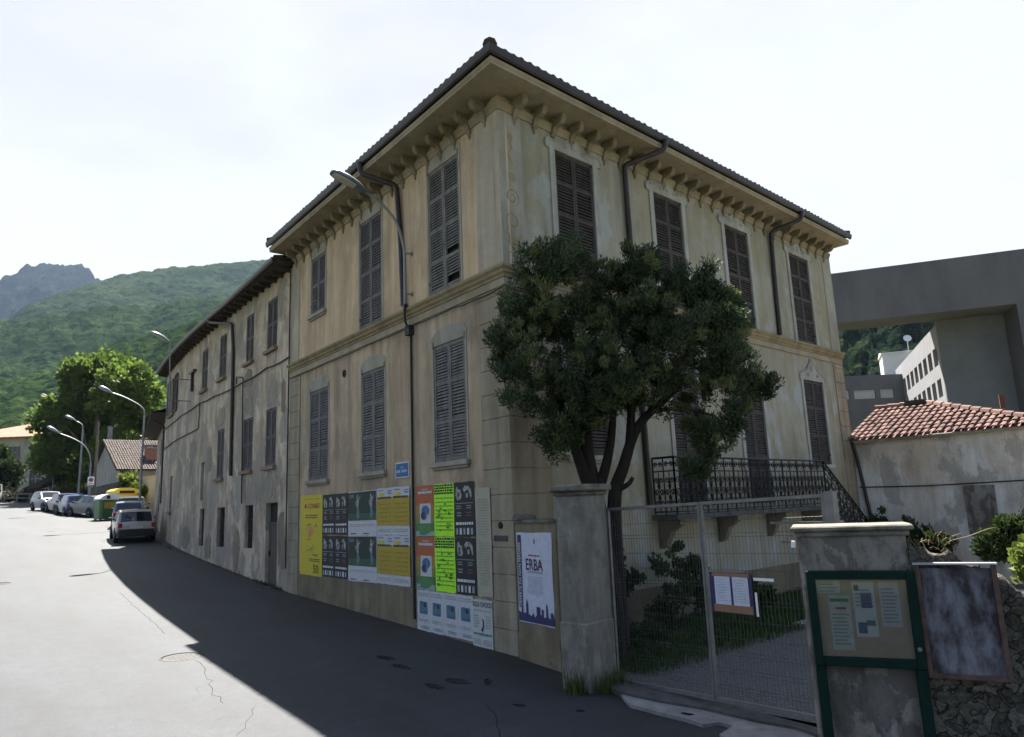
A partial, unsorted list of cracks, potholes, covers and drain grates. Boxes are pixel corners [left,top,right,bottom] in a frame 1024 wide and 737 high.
manhole cover [158,652,205,662]
crack [196,661,253,733]
